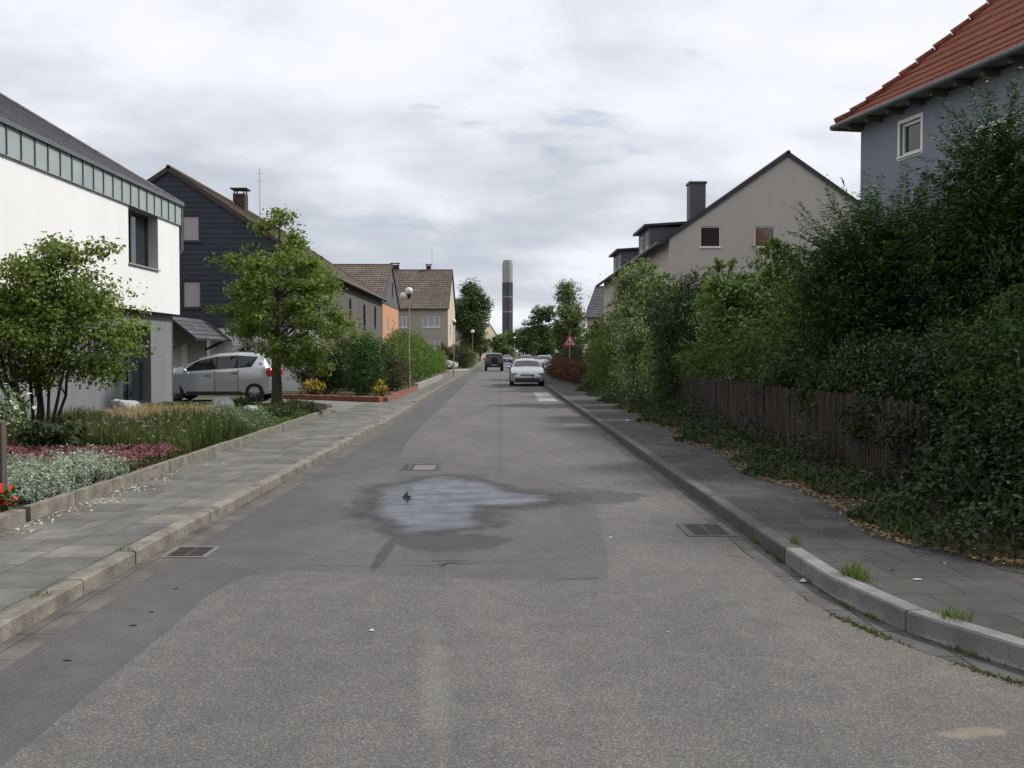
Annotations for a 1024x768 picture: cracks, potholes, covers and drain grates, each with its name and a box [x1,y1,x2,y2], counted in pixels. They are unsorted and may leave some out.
drain grate [676,523,740,537]
drain grate [158,546,221,558]
